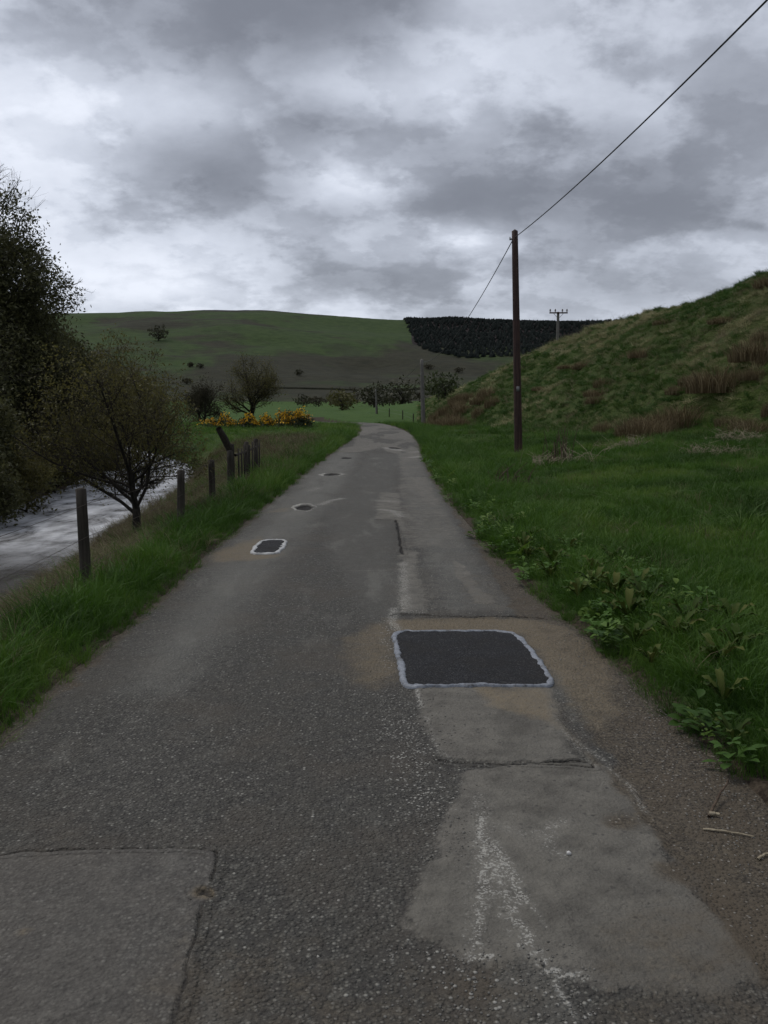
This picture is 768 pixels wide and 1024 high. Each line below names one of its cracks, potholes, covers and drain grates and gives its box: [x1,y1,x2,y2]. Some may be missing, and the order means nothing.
crack [428,756,602,771]
pothole [291,503,319,513]
crack [0,844,226,1024]
